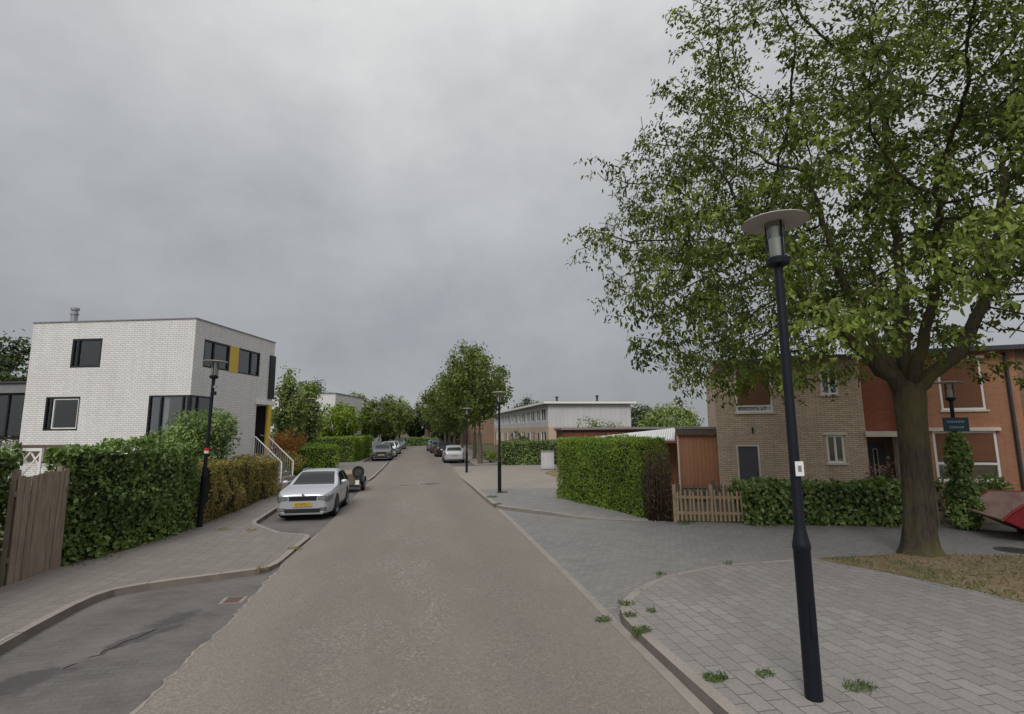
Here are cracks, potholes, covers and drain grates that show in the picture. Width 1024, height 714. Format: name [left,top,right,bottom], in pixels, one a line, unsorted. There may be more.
crack [63,629,156,669]
